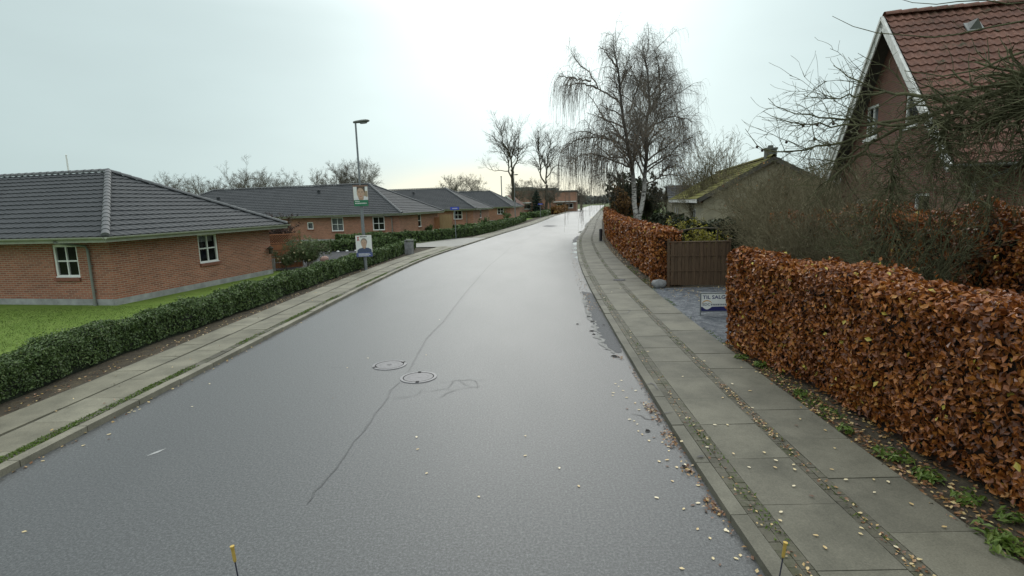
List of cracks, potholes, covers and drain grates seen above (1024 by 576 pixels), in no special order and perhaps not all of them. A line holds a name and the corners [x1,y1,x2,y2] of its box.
manhole cover [372,360,407,370]
manhole cover [400,371,437,384]
